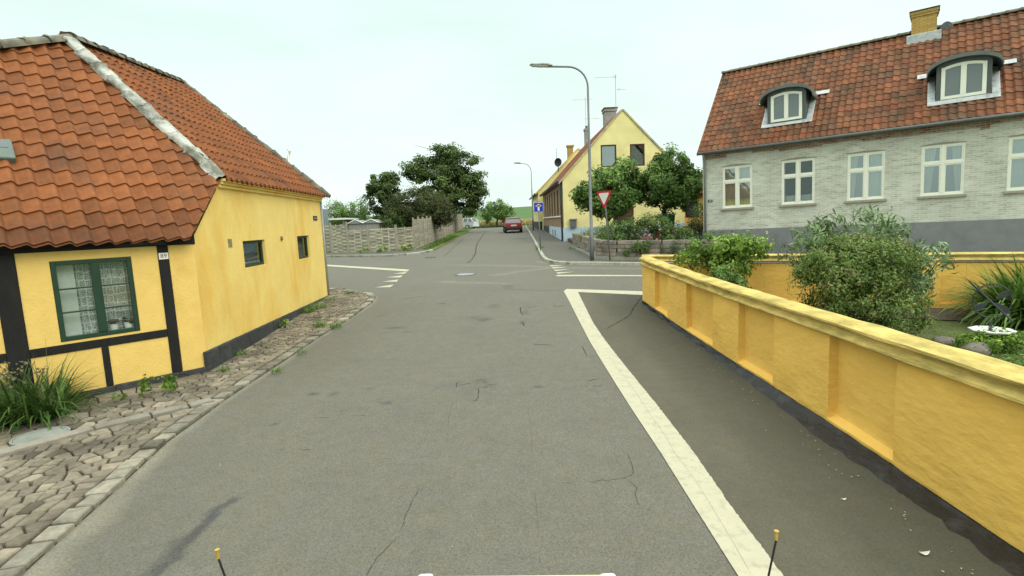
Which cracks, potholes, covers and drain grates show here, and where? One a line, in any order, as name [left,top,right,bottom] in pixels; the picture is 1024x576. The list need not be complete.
manhole cover [9,426,71,447]
